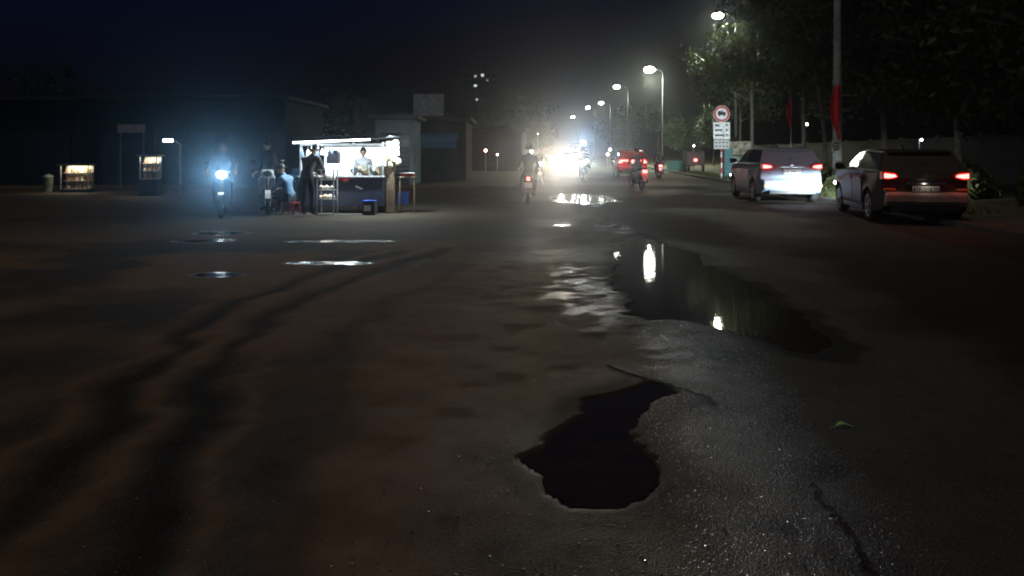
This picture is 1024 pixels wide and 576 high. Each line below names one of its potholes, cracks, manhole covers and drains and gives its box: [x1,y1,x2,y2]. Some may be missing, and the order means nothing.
crack [607,364,718,404]
pothole [478,373,713,529]
crack [808,481,877,576]
pothole [596,233,870,364]
